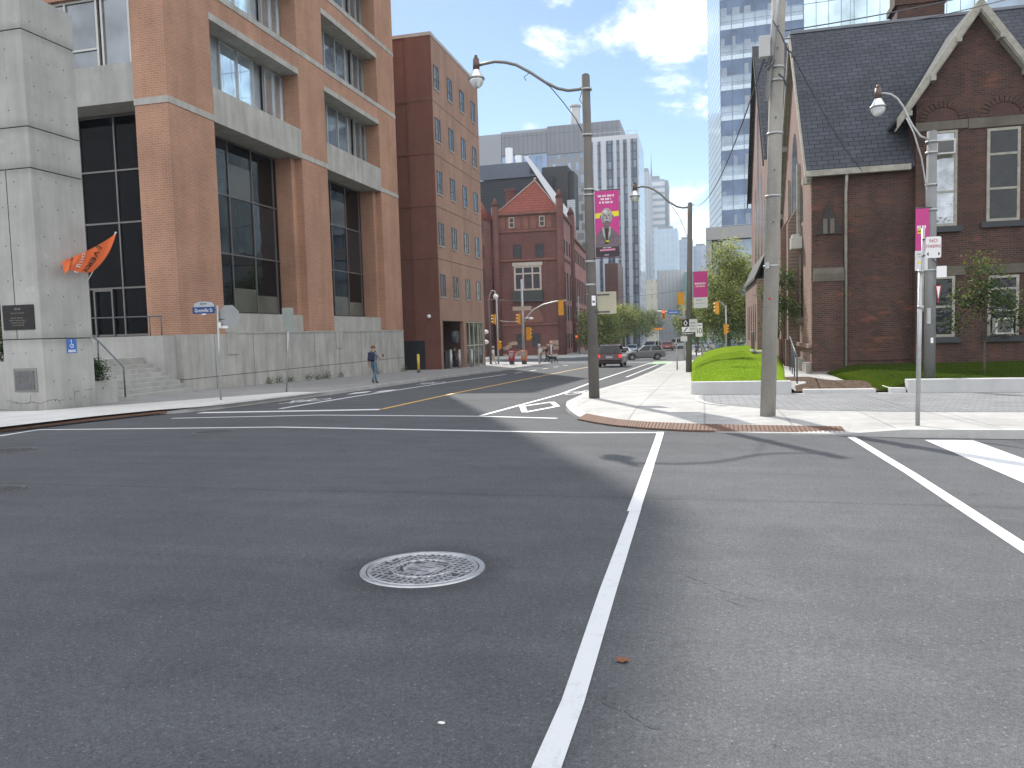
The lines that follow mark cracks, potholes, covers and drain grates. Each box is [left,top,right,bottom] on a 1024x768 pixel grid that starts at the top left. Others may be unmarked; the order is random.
manhole cover [359,551,485,588]
